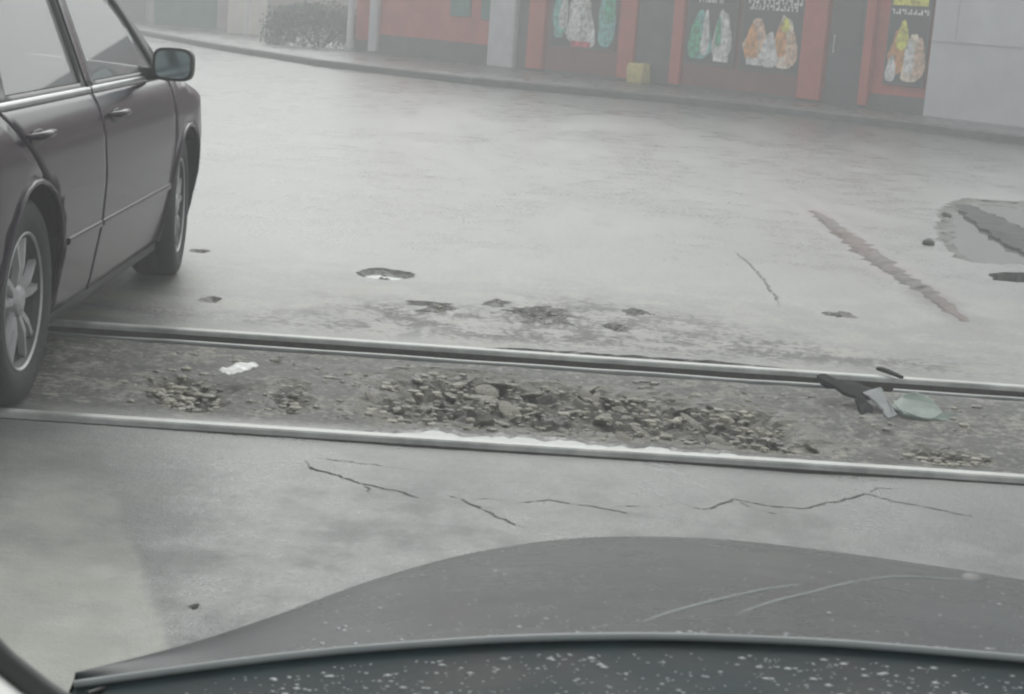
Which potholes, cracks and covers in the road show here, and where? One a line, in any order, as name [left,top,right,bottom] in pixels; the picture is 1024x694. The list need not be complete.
pothole [405,300,461,313]
pothole [933,198,1024,265]
pothole [343,366,861,457]
pothole [139,374,231,413]
pothole [601,323,629,332]
pothole [500,306,582,329]
pothole [356,268,416,280]
pothole [988,272,1024,282]
pothole [262,378,317,415]
pothole [480,299,512,307]
crack [734,251,781,307]
crack [304,458,1008,528]
